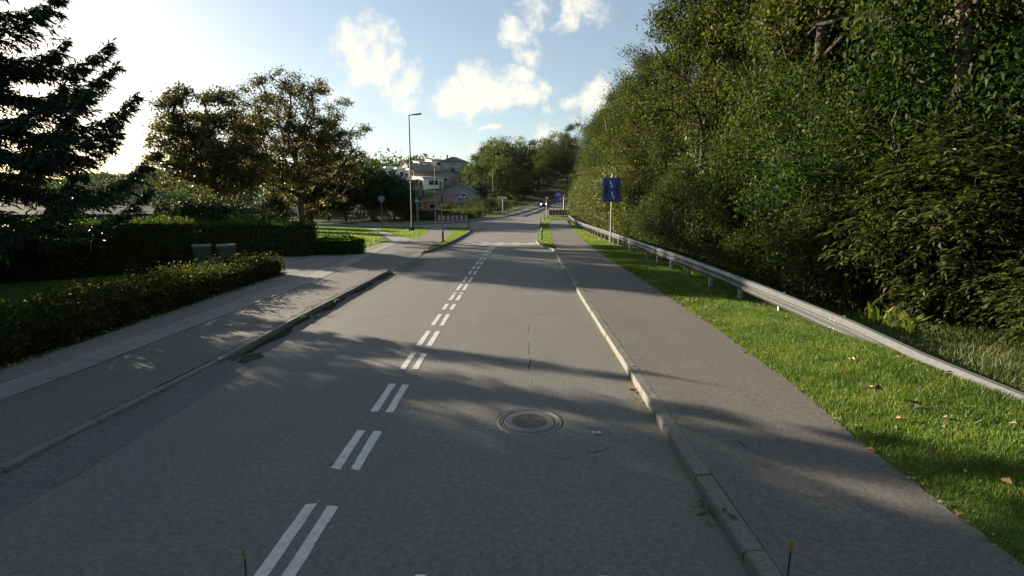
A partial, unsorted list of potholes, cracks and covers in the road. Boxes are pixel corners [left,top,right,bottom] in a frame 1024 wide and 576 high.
manhole cover [496,408,564,436]
pothole [238,352,265,364]
